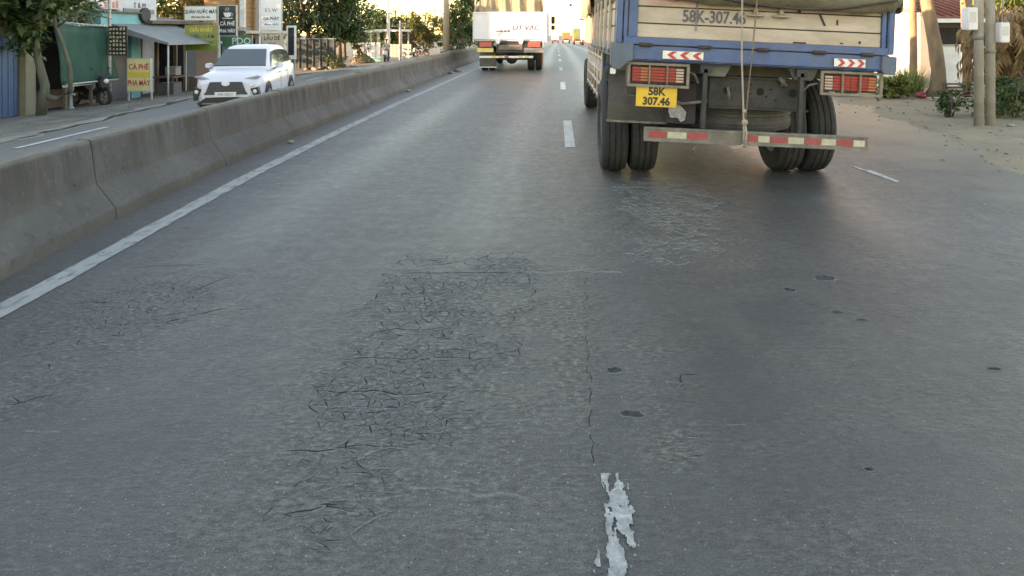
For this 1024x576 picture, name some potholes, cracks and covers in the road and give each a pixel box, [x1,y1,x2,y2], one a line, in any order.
pothole [604,366,625,374]
crack [262,252,622,560]
pothole [618,409,647,418]
crack [610,178,726,266]
crack [40,264,230,348]
